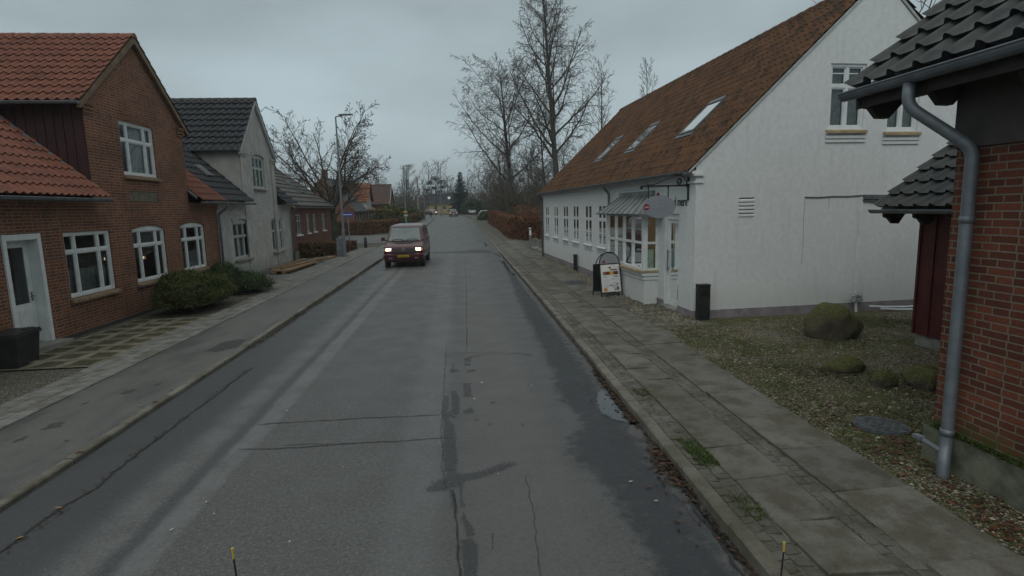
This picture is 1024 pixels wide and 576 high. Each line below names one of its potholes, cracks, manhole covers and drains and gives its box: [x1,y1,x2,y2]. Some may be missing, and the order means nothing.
manhole cover [852,416,911,437]
crack [0,367,253,553]
